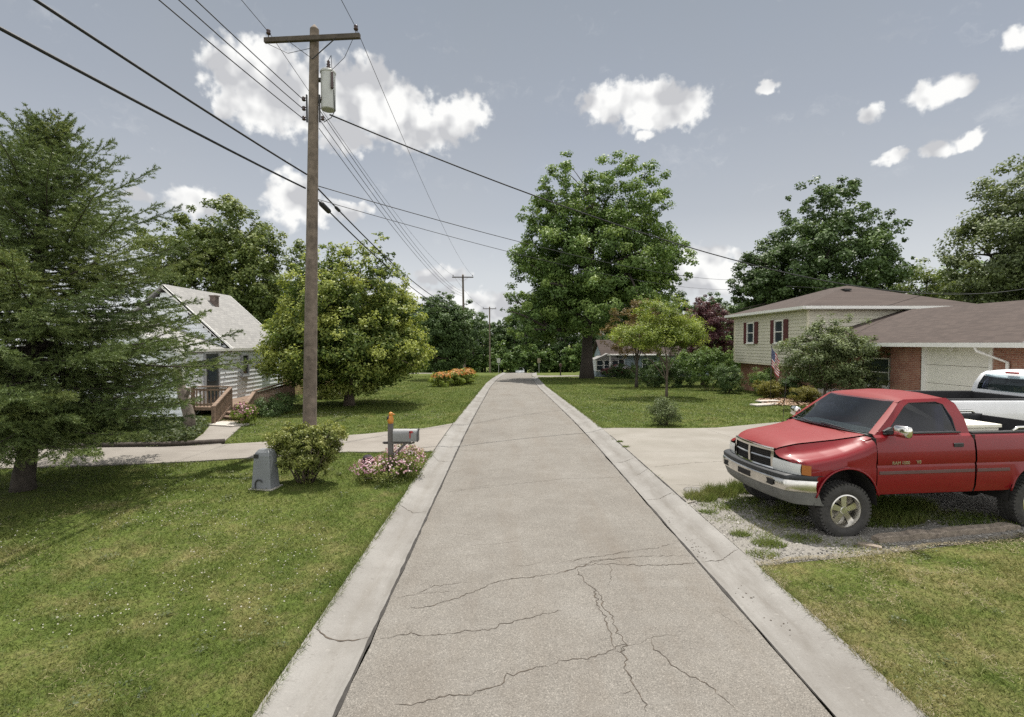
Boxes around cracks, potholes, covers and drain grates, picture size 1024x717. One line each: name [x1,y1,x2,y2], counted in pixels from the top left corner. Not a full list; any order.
crack [394,545,736,711]
